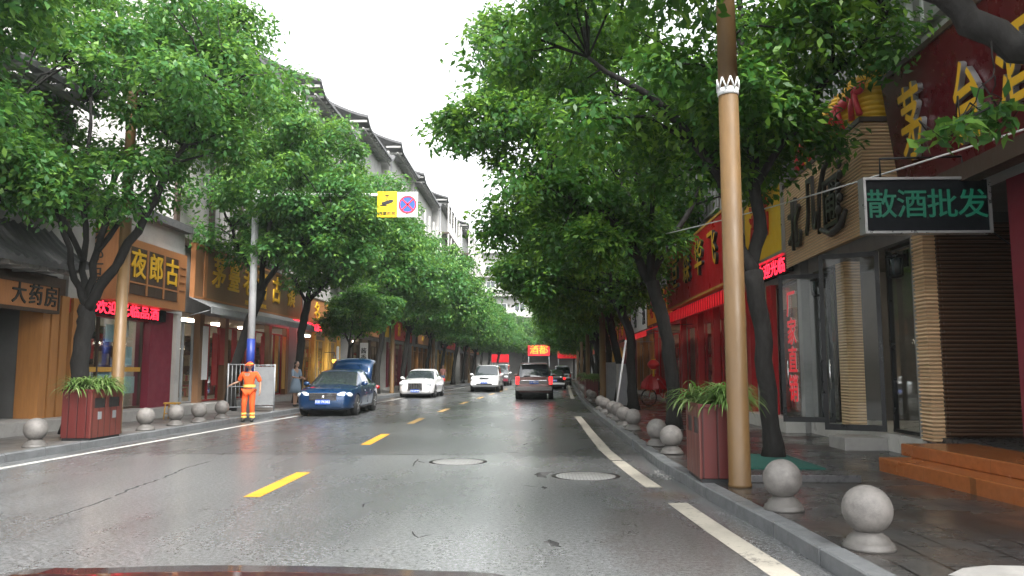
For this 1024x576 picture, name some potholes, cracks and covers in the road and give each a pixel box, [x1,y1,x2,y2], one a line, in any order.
manhole cover [551,471,620,481]
crack [44,443,551,521]
